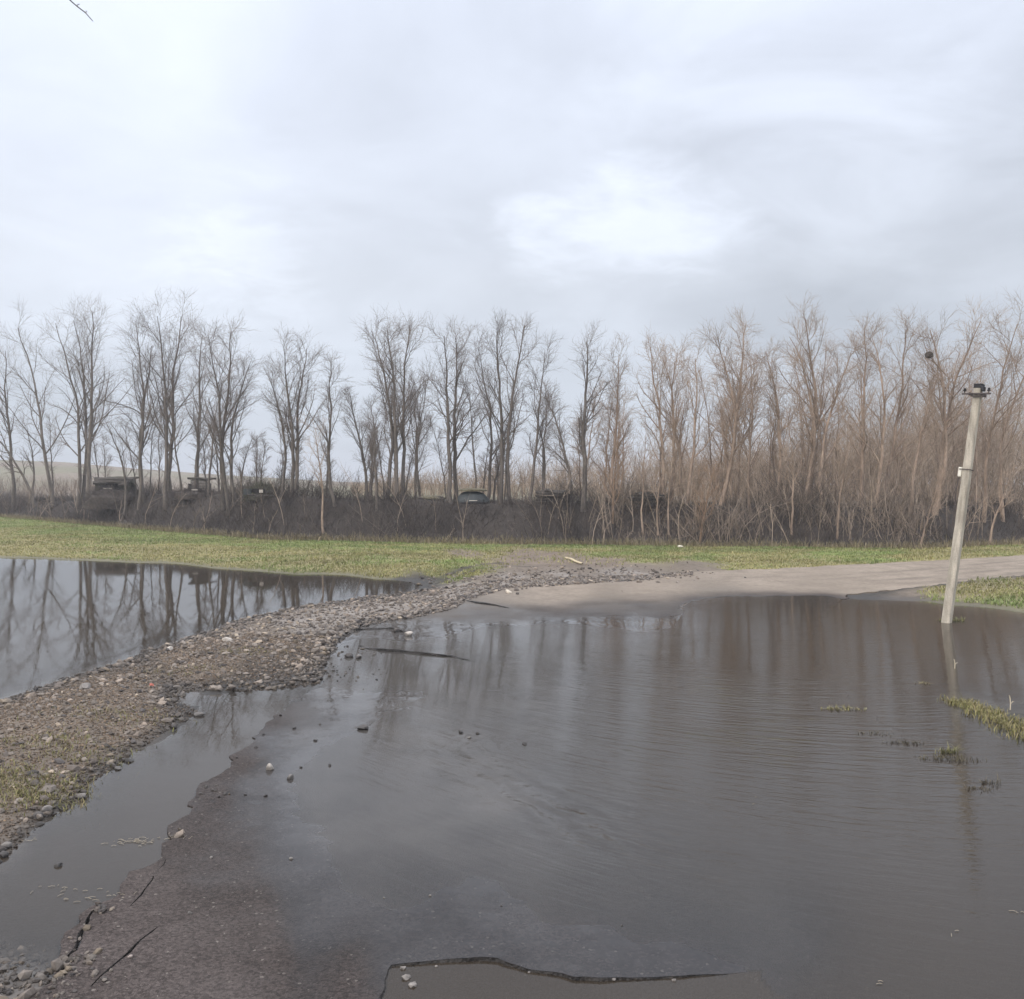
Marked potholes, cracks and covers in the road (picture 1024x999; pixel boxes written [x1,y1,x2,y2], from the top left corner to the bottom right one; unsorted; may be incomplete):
crack [467,600,509,608]
crack [354,627,477,662]
crack [61,911,156,986]
pothole [379,957,763,999]
